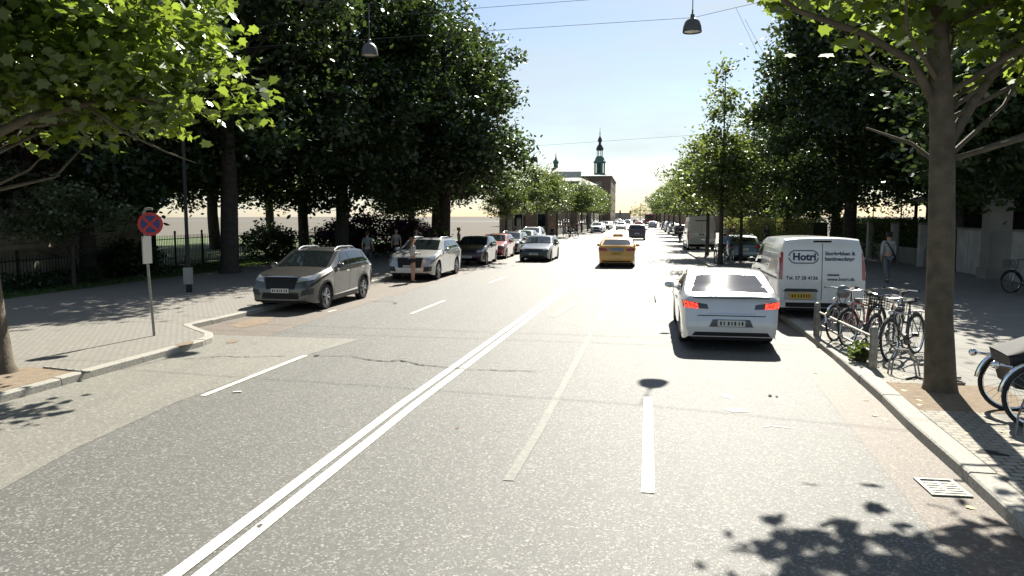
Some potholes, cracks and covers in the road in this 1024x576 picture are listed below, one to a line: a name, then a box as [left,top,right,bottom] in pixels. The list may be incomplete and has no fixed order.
crack [323,355,528,371]
drain grate [913,477,974,498]
